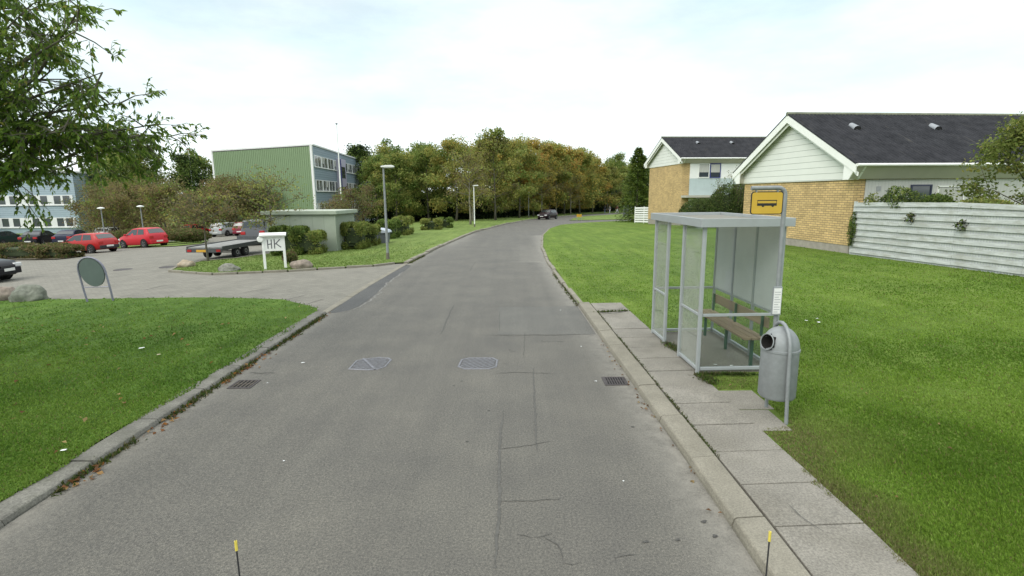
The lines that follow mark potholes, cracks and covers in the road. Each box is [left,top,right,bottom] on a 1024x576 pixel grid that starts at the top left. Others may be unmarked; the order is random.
manhole cover [458,357,498,369]
drain grate [601,377,628,386]
manhole cover [348,357,392,370]
drain grate [227,380,261,389]
